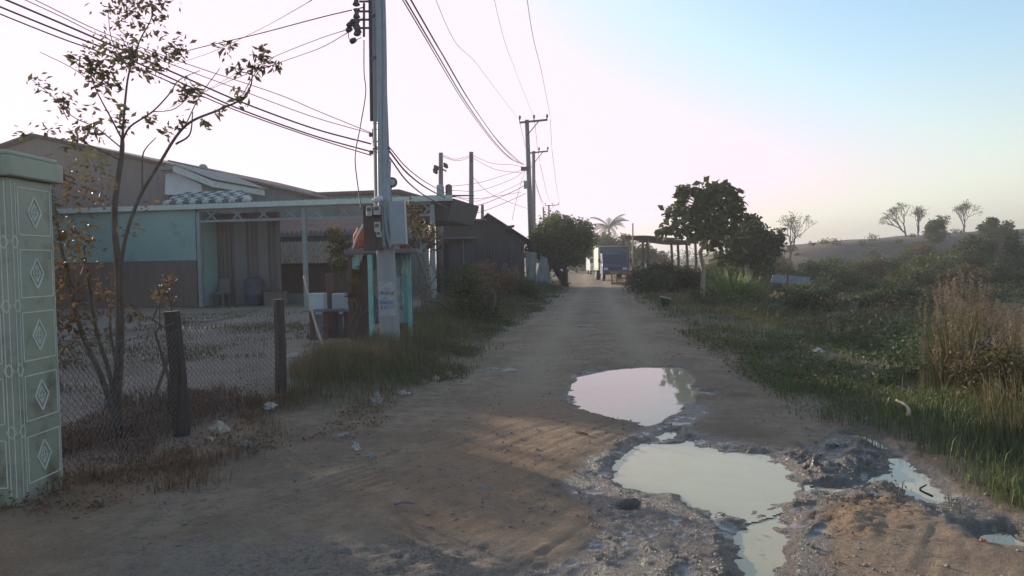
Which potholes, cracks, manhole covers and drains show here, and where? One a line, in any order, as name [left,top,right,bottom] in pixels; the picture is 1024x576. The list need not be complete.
pothole [966,525,1024,546]
pothole [713,502,809,576]
pothole [592,433,815,524]
pothole [811,427,963,503]
pothole [558,364,761,427]
